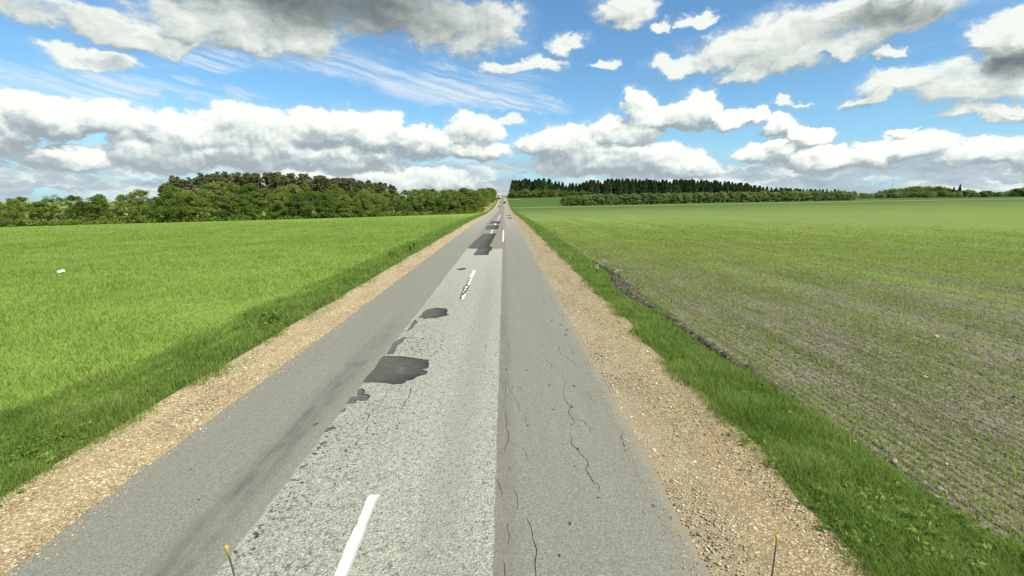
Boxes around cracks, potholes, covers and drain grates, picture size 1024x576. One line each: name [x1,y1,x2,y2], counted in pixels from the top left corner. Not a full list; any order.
crack [365,386,415,430]
crack [546,347,610,486]
crack [485,316,537,576]
